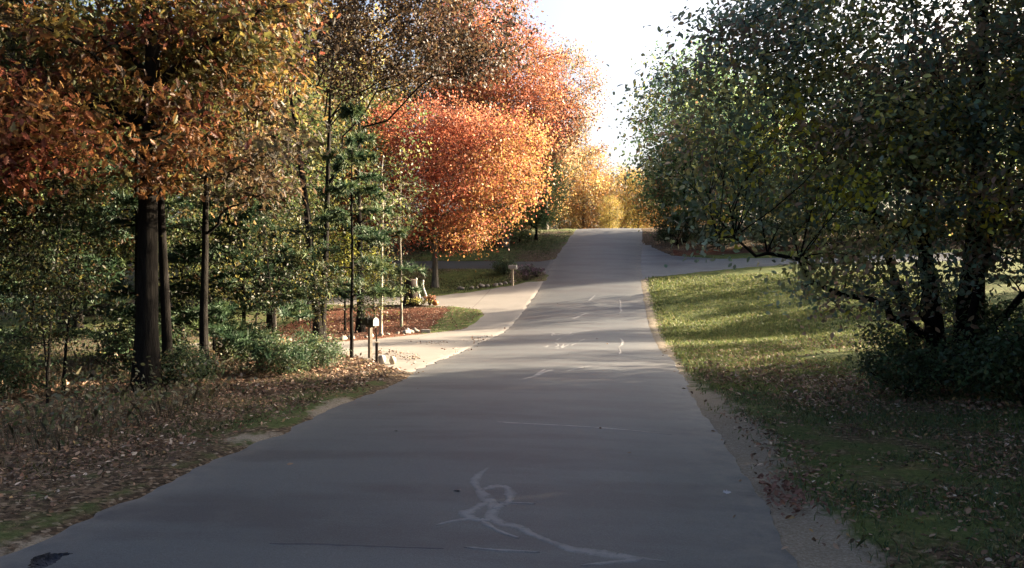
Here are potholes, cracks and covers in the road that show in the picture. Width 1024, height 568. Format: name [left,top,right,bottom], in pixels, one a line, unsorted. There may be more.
crack [270,467,665,566]
crack [523,366,587,379]
